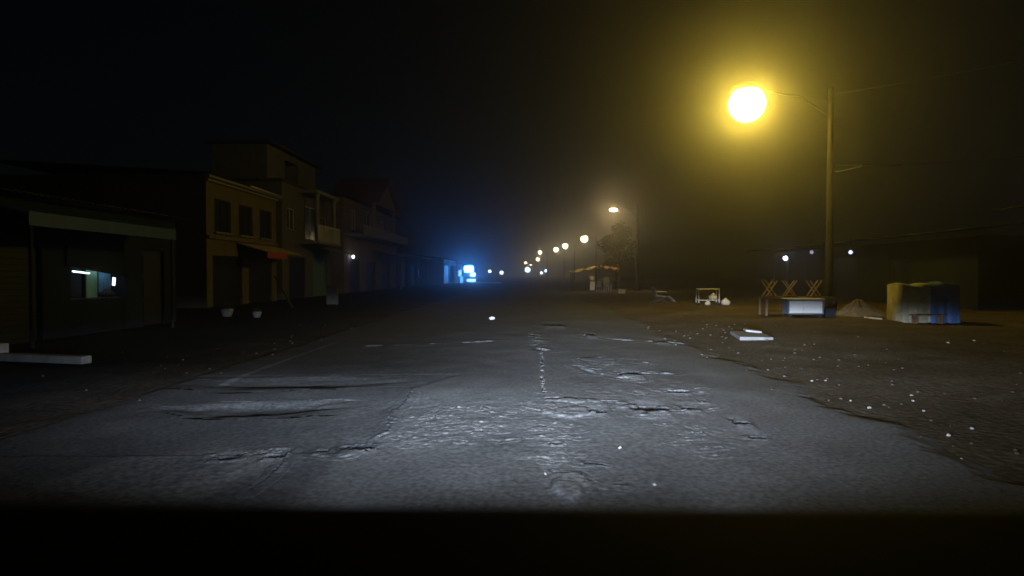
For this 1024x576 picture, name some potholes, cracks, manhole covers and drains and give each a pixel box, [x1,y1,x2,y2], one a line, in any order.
pothole [725,417,757,428]
pothole [622,405,675,413]
crack [202,332,735,499]
